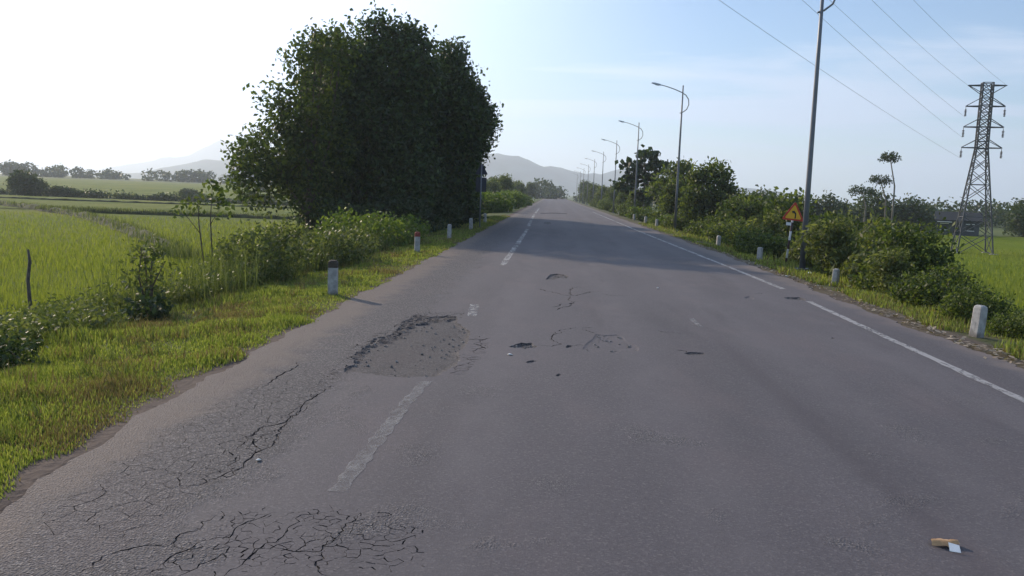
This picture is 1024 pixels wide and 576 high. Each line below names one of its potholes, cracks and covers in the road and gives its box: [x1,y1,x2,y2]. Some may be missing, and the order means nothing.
crack [33,362,425,576]
crack [453,336,488,373]
pothole [344,314,471,378]
